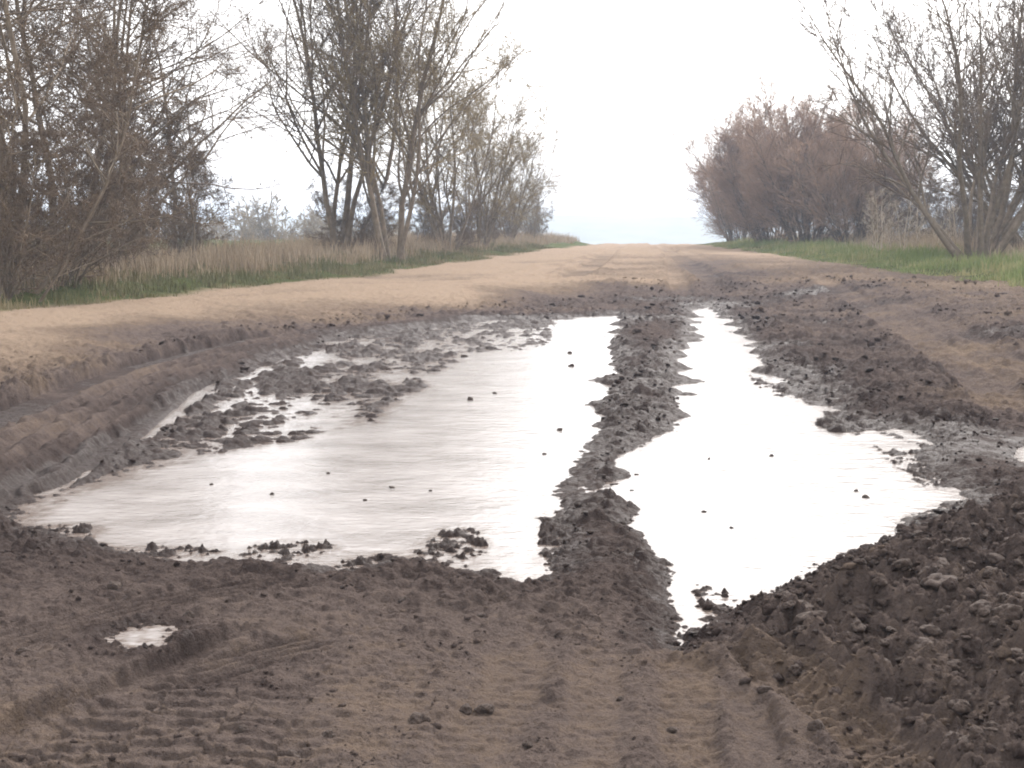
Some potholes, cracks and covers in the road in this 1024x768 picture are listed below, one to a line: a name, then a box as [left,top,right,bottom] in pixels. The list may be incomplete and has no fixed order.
pothole [0,308,643,583]
pothole [92,609,193,662]
pothole [598,301,1004,651]
